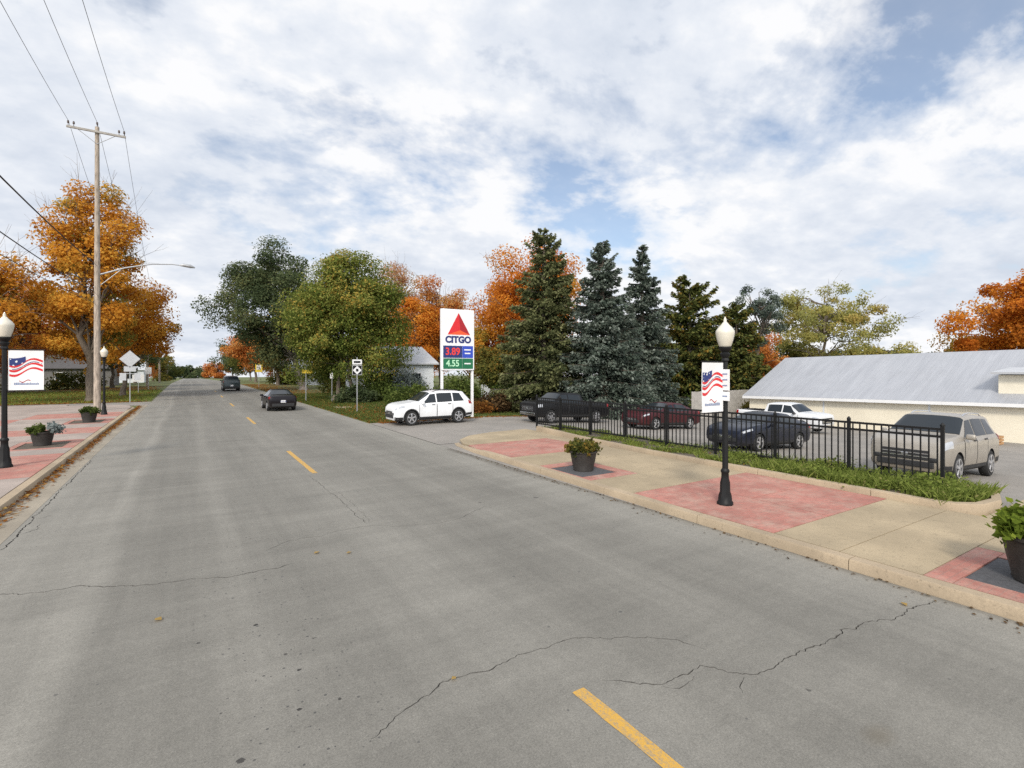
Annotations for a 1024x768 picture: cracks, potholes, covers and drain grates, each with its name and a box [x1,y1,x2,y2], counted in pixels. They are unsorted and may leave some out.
crack [605,601,934,693]
crack [372,637,706,739]
crack [1,462,188,550]
crack [0,564,289,595]
